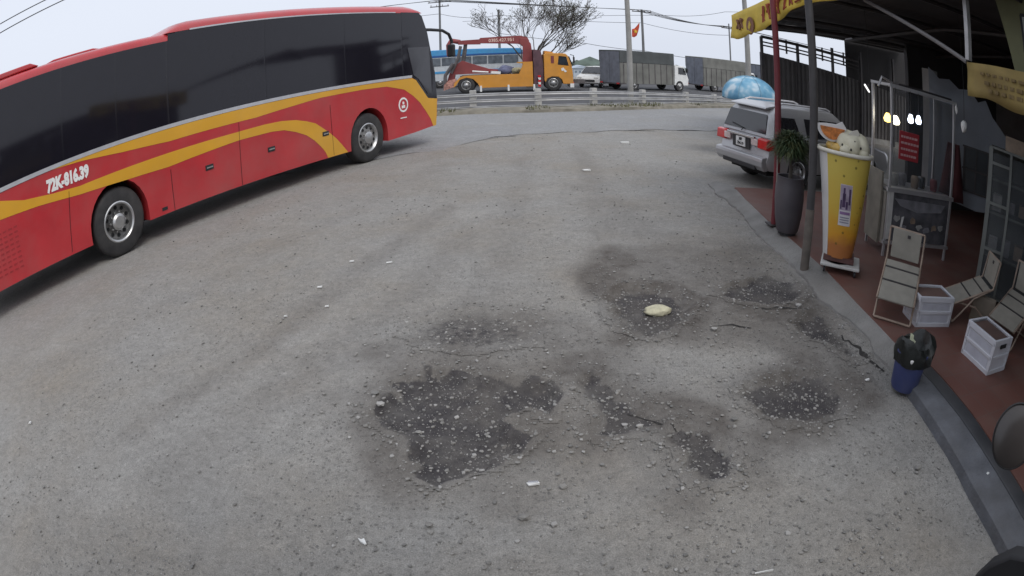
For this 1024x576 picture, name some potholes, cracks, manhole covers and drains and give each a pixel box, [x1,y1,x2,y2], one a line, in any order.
pothole [392,304,554,357]
crack [841,335,884,372]
pothole [647,417,749,492]
pothole [594,279,703,343]
pothole [728,364,860,433]
pothole [360,360,574,491]
pothole [709,268,812,309]
